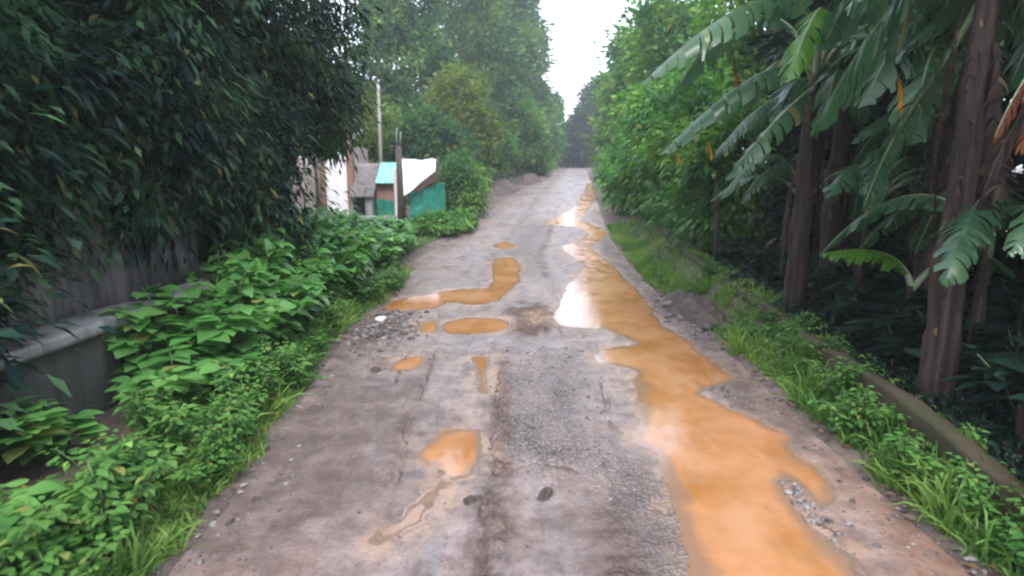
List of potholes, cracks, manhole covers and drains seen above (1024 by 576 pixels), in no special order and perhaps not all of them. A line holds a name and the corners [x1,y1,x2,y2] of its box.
pothole [471,356,491,394]
pothole [441,317,511,335]
pothole [543,183,863,576]
pothole [390,356,426,372]
pothole [381,257,523,311]
pothole [417,428,483,480]
pothole [463,494,482,506]
crack [399,418,412,480]
pothole [536,487,554,501]
